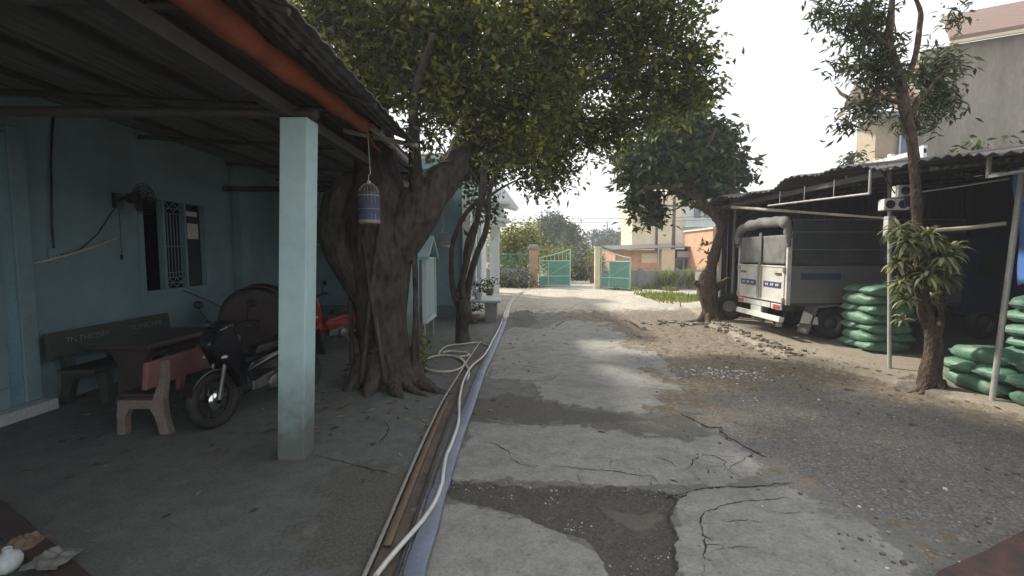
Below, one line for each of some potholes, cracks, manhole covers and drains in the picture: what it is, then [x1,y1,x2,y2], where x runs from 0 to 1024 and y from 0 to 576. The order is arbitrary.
crack [556,410,800,576]
pothole [447,480,679,576]
